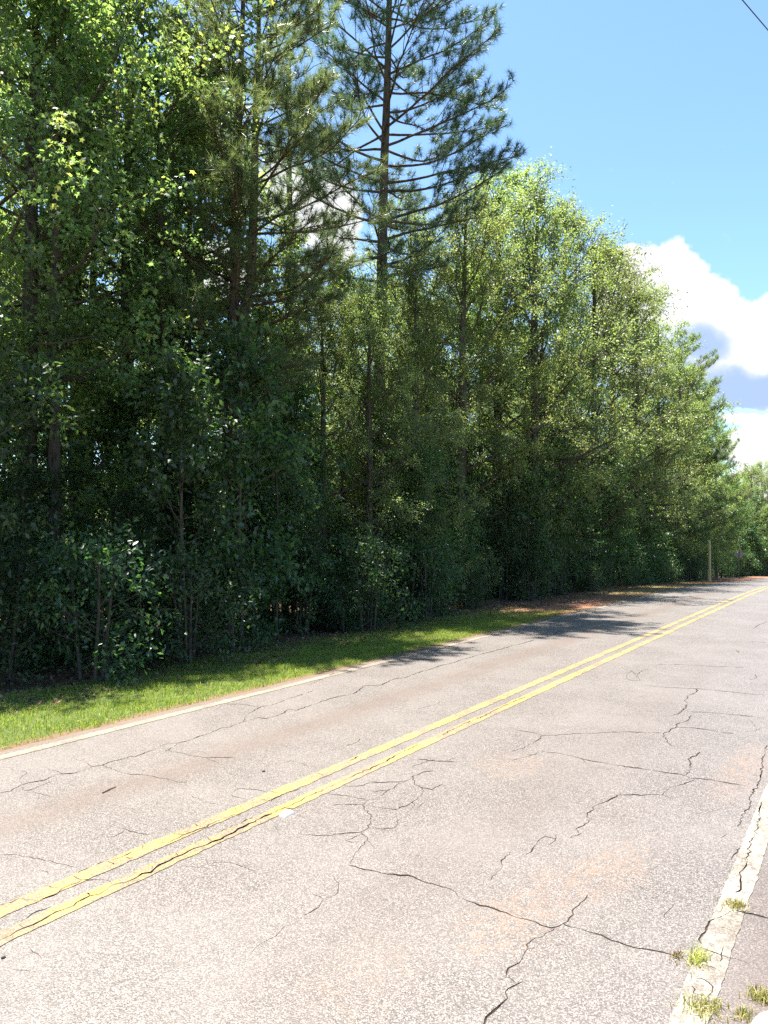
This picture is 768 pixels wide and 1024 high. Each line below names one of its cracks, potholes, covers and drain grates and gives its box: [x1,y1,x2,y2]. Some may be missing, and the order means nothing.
crack [510,622,768,893]
crack [252,865,768,1024]
crack [0,630,562,797]
crack [491,835,556,880]
crack [1,697,525,932]
